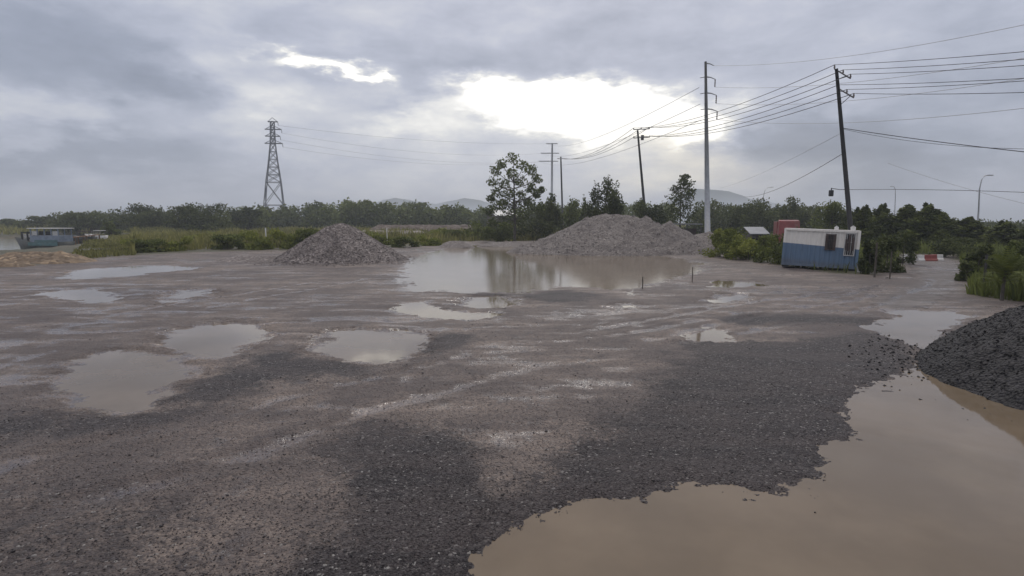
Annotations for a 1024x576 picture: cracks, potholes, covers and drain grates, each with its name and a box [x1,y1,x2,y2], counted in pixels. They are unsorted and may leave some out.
pothole [22,344,226,421]
pothole [287,326,451,367]
pothole [142,317,289,363]
